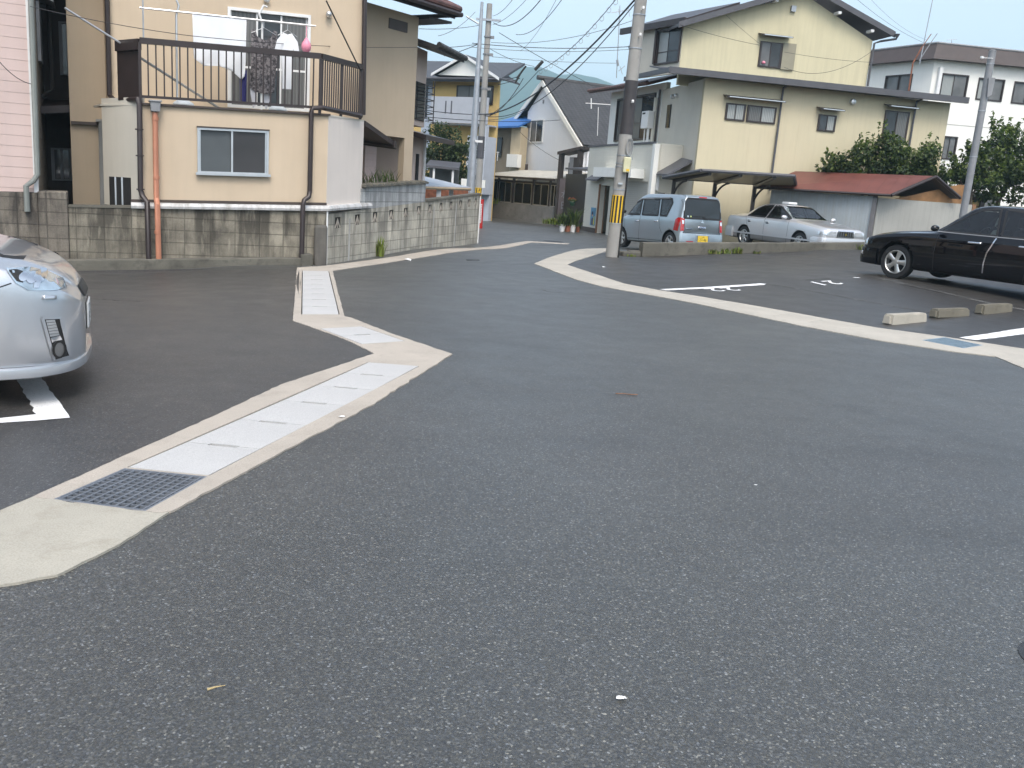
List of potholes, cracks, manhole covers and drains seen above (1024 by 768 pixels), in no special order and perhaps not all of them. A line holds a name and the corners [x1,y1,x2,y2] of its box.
drain grate [55,468,207,511]
drain grate [924,337,981,348]
